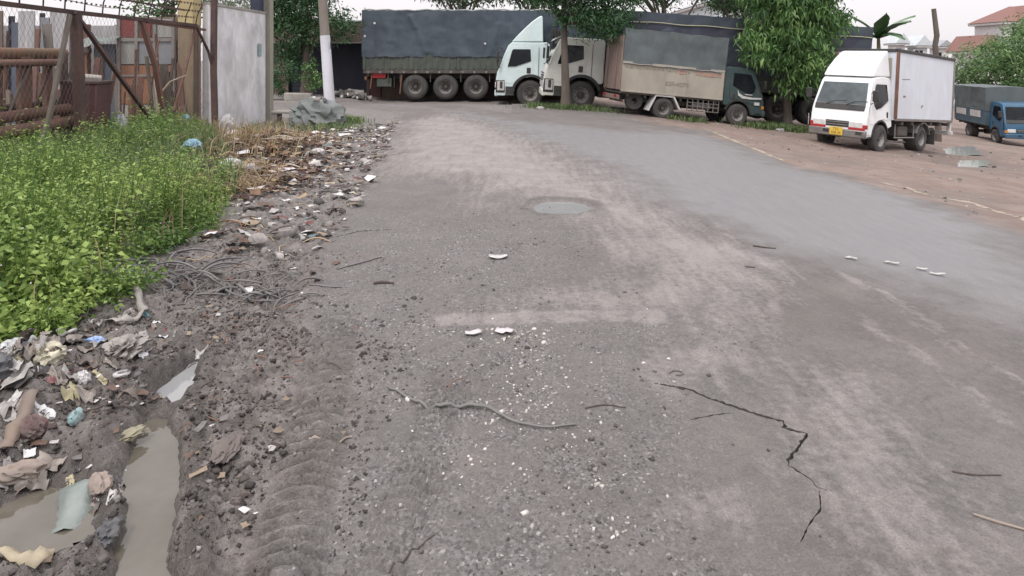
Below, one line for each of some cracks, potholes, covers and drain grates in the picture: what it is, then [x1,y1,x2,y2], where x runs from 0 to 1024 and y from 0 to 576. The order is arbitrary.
crack [654,383,826,543]
pothole [525,198,597,213]
